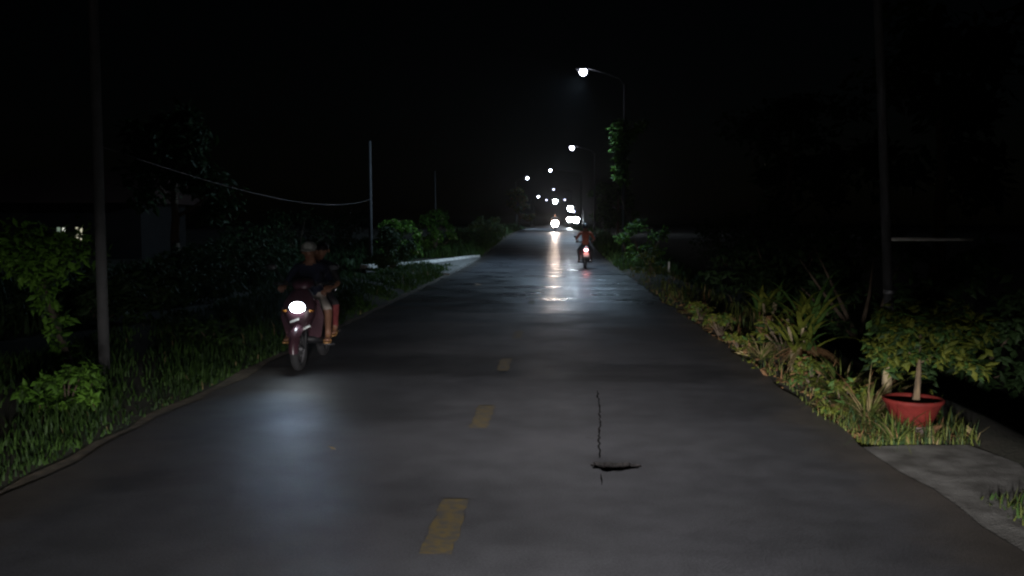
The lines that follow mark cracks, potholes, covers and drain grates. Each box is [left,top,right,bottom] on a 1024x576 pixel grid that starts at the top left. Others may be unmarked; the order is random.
pothole [590,461,642,472]
crack [588,390,603,485]
